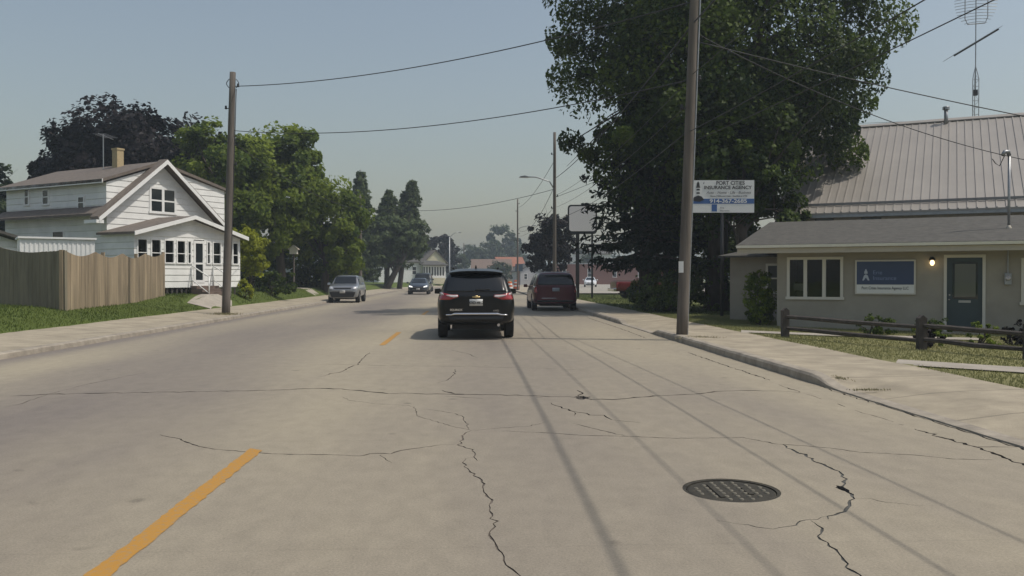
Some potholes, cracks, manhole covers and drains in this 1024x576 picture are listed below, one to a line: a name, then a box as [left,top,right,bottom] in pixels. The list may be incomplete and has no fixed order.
crack [19,318,1024,576]
manhole cover [682,479,781,503]
